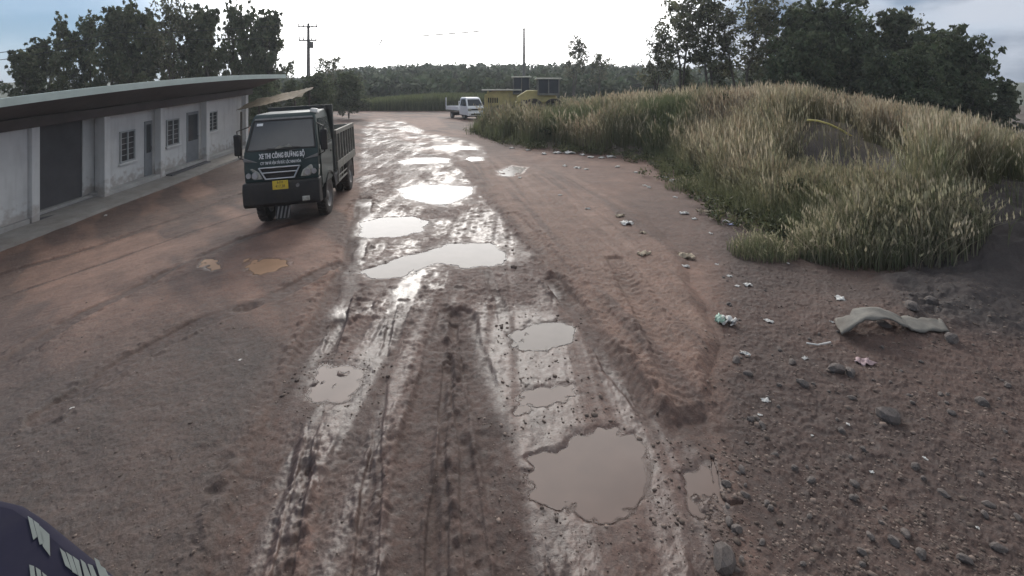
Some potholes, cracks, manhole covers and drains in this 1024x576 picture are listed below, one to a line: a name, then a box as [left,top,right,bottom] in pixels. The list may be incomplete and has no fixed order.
pothole [495,165,529,177]
pothole [506,377,592,420]
pothole [296,357,374,412]
pothole [194,257,226,273]
pothole [355,241,510,280]
pothole [239,256,296,276]
pothole [503,318,582,355]
pothole [395,184,475,207]
pothole [672,454,743,528]
pothole [518,419,661,531]
pothole [356,215,431,239]
